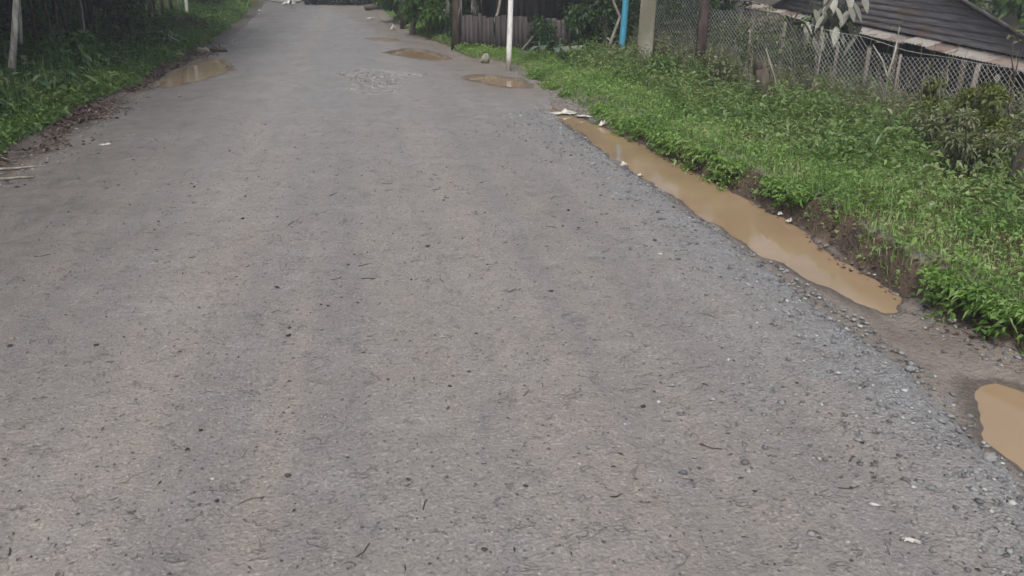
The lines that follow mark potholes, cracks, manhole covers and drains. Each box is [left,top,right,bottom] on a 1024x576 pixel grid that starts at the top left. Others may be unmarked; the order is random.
pothole [152,57,237,88]
pothole [460,74,534,89]
pothole [381,48,453,61]
